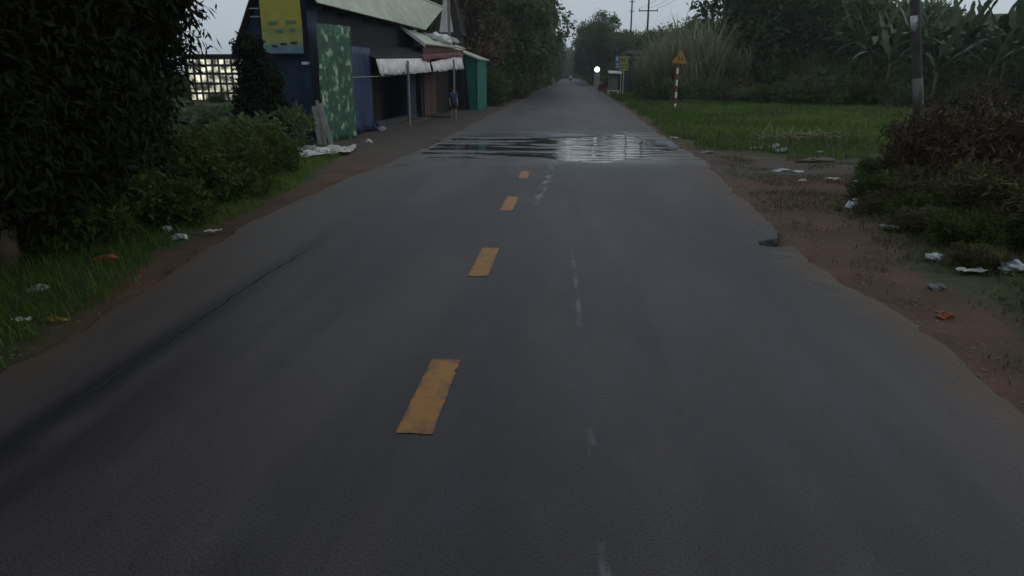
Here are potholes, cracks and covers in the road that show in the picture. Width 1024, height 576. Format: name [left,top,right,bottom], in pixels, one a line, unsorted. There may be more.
crack [0,247,326,451]
